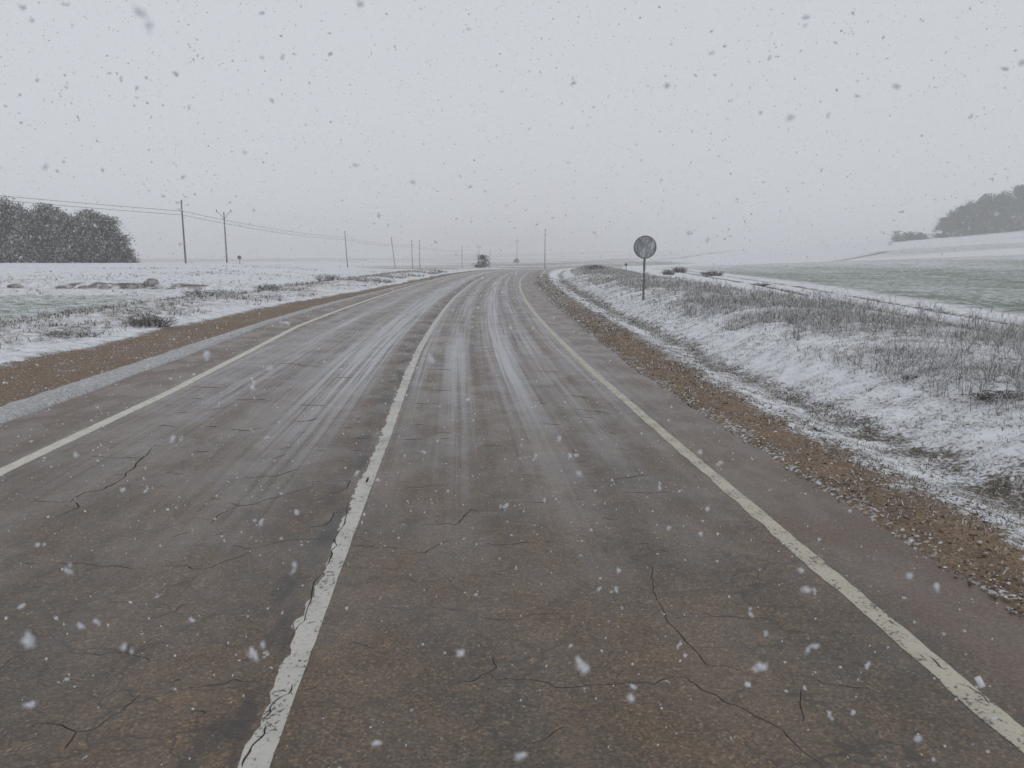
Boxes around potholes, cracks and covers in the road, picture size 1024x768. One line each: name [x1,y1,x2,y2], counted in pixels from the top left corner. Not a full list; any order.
crack [71,645,155,661]
crack [29,695,140,750]
crack [39,445,156,515]
crack [449,543,864,767]
crack [167,679,245,688]
crack [166,405,506,643]
